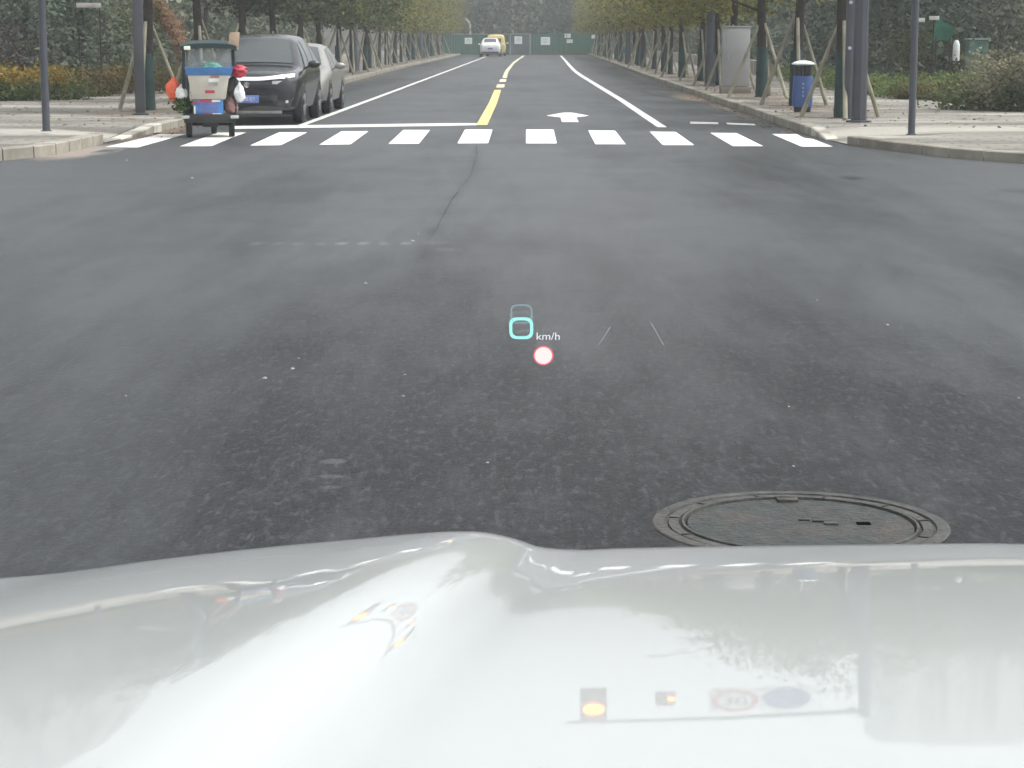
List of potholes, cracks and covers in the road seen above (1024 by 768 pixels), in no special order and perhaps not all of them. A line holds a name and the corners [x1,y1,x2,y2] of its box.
manhole cover [652,491,951,547]
